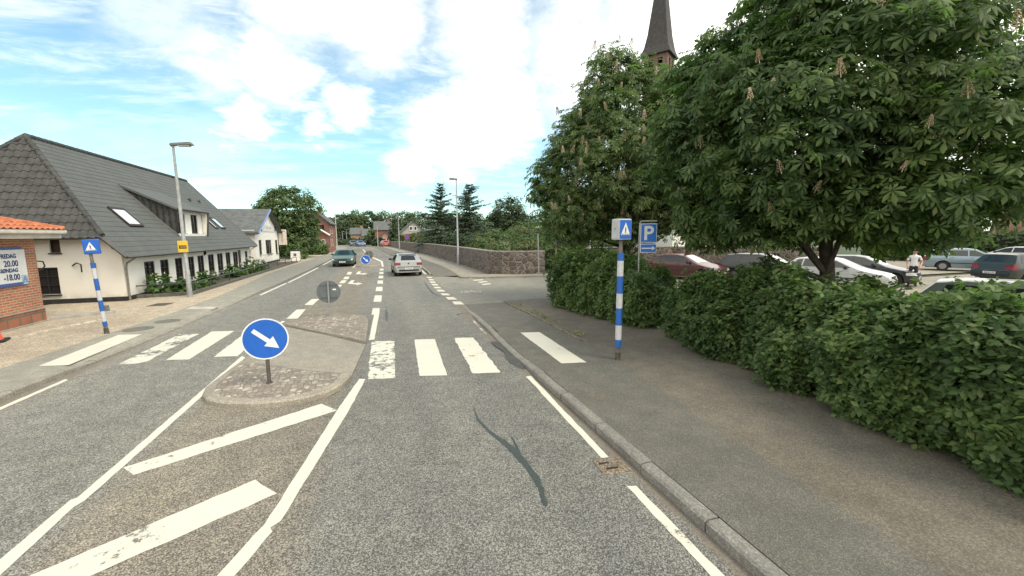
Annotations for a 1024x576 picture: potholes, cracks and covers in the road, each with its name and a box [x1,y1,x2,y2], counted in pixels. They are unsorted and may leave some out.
drain grate [592,457,632,475]
